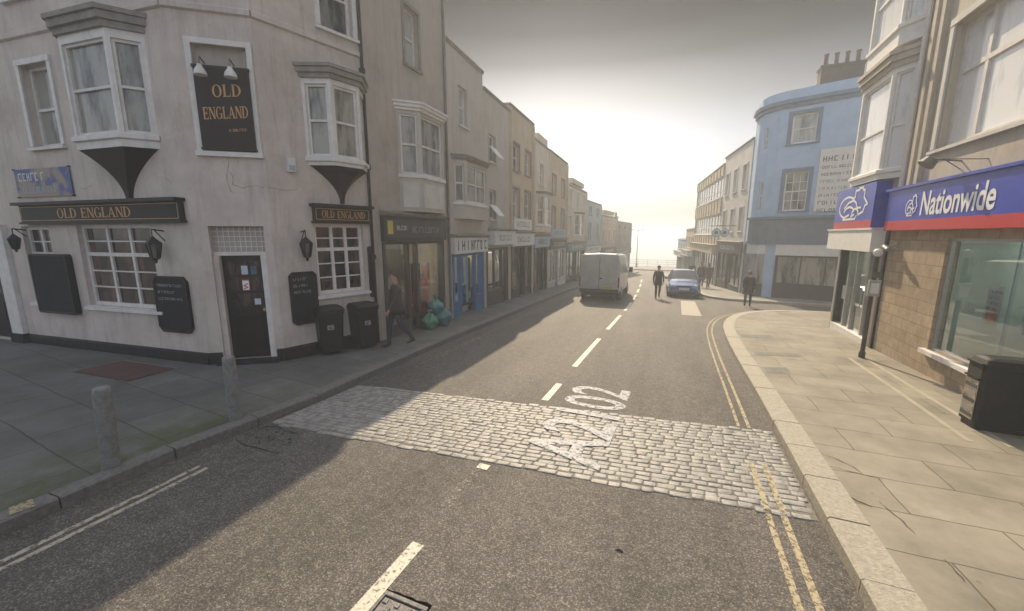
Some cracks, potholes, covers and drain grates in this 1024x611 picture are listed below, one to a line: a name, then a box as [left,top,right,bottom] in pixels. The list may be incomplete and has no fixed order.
manhole cover [356,578,445,611]
crack [236,440,280,453]
